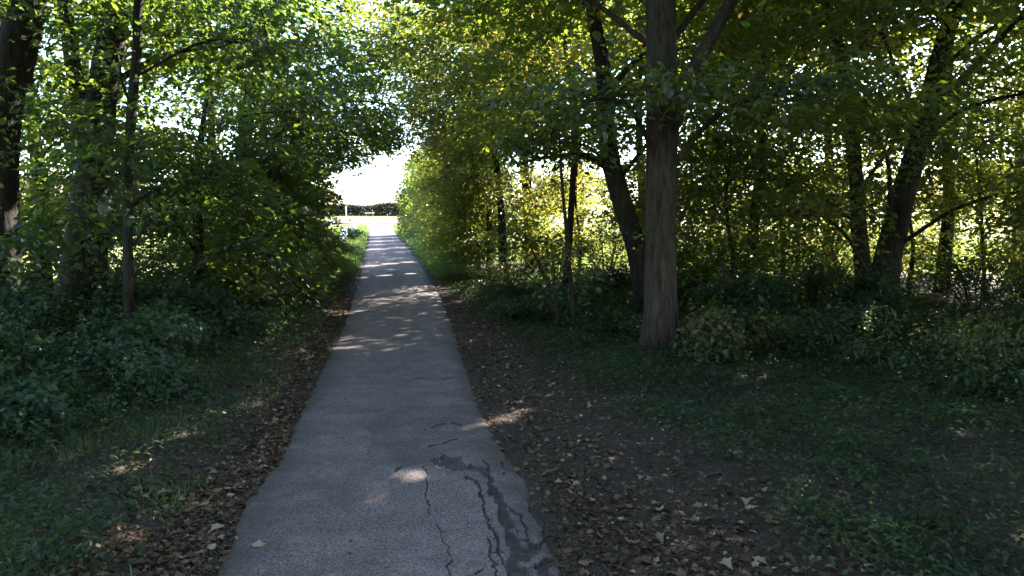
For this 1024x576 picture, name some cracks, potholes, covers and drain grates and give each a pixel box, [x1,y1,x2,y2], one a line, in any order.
crack [422,421,564,576]
